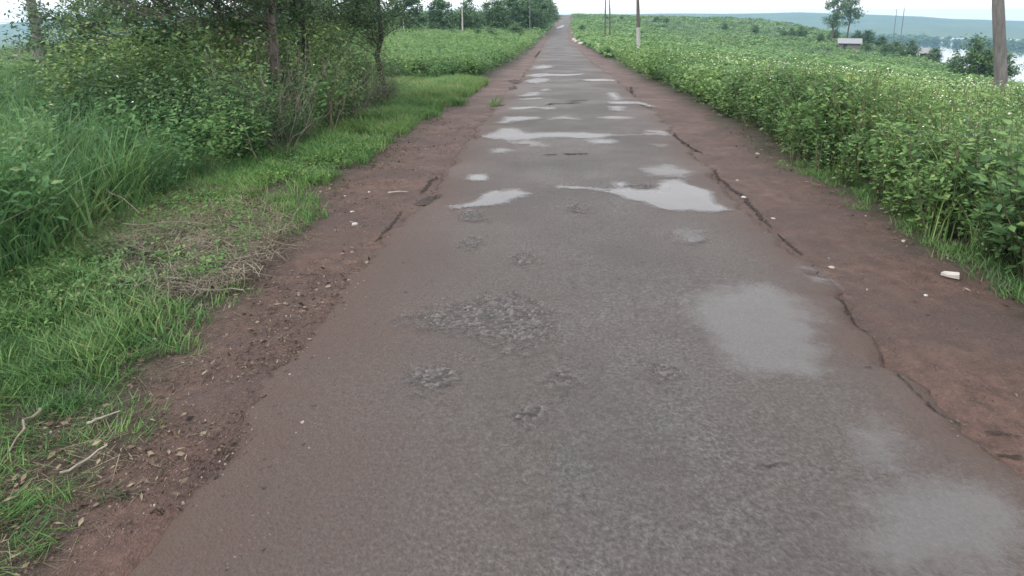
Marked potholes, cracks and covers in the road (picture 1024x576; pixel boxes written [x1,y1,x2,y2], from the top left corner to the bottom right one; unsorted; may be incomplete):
pothole [539,368,584,393]
crack [421,176,439,193]
pothole [406,361,459,396]
crack [674,132,803,255]
pothole [511,402,554,428]
pothole [649,360,681,385]
pothole [398,291,560,353]
pothole [568,204,589,213]
pothole [459,210,490,221]
pothole [681,231,705,243]
crack [836,297,869,332]
crack [894,370,962,425]
